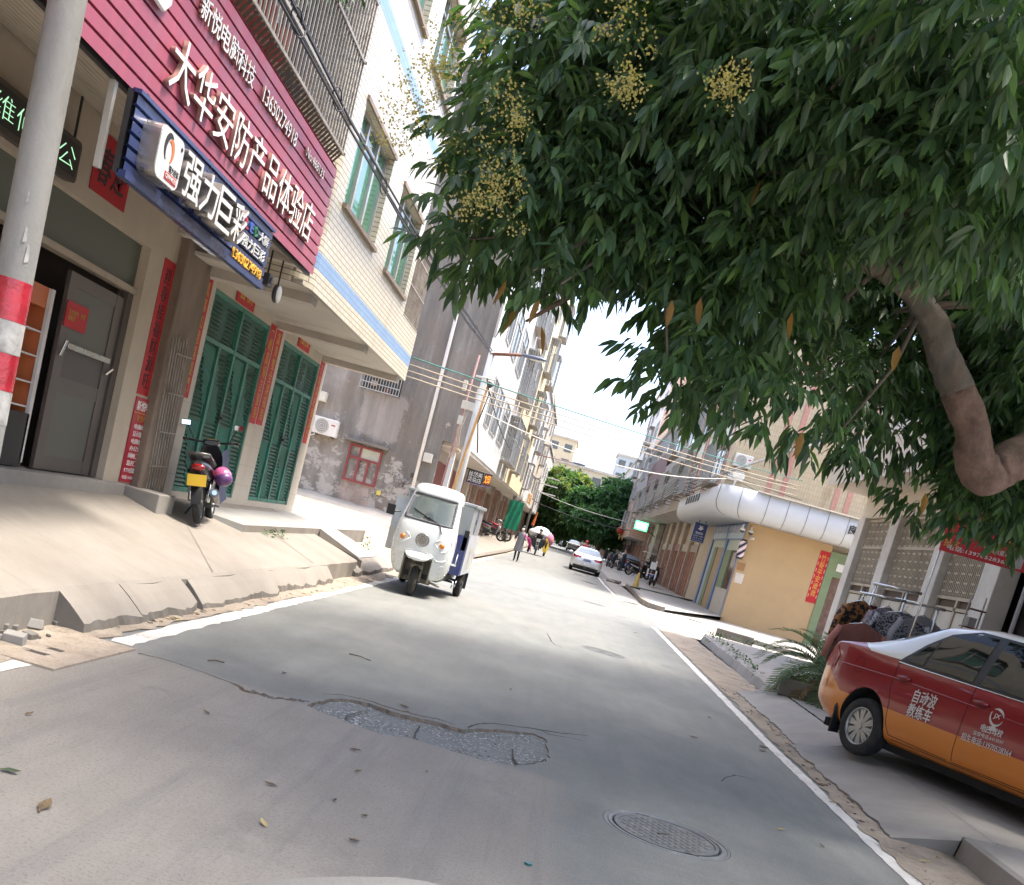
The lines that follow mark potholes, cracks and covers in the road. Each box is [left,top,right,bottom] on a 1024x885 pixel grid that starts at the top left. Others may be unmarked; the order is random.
crack [138,653,309,702]
manhole cover [603,809,730,861]
pothole [307,699,550,766]
